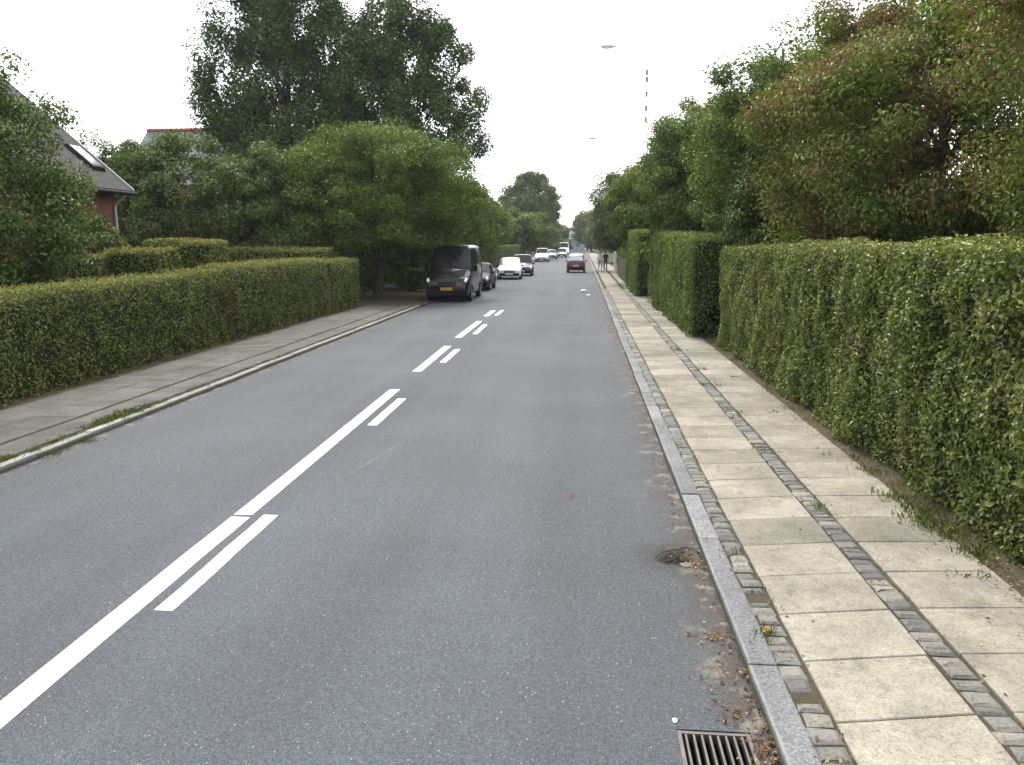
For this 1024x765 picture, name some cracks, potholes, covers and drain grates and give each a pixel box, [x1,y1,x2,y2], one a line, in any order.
pothole [654,547,704,568]
drain grate [677,730,760,765]
